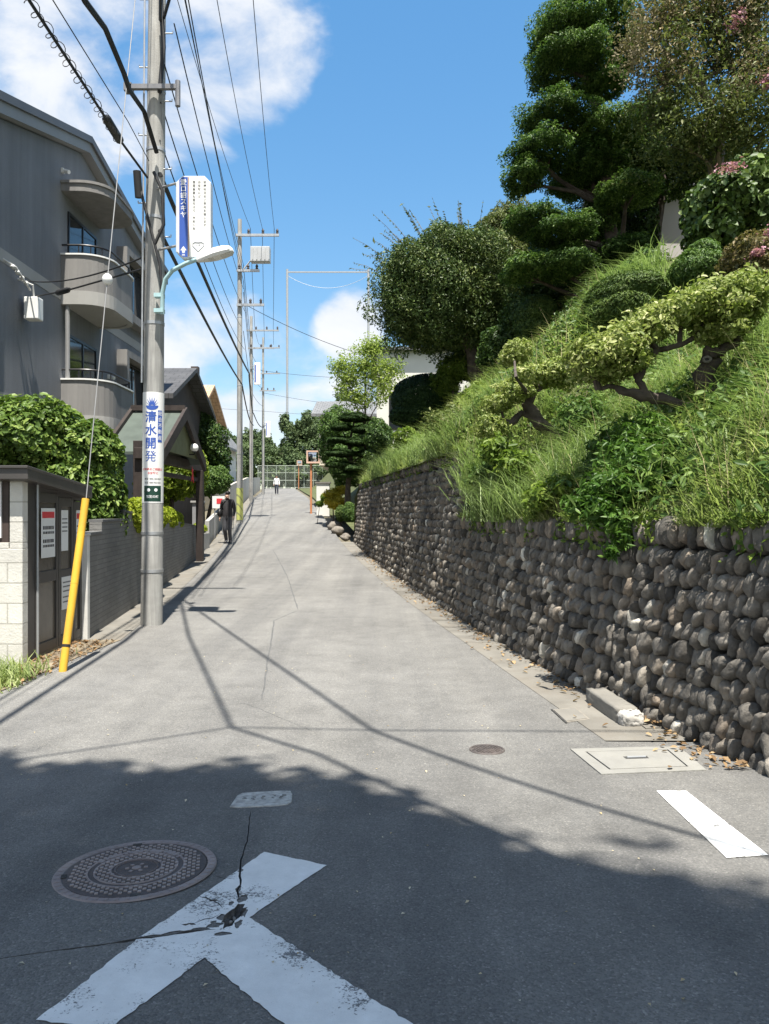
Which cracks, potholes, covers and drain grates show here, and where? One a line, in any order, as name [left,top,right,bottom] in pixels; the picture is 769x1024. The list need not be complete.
manhole cover [469,744,505,755]
crack [174,549,317,733]
utility cover [230,790,292,808]
manhole cover [51,840,217,903]
utility cover [570,746,706,775]
crack [0,811,251,959]
